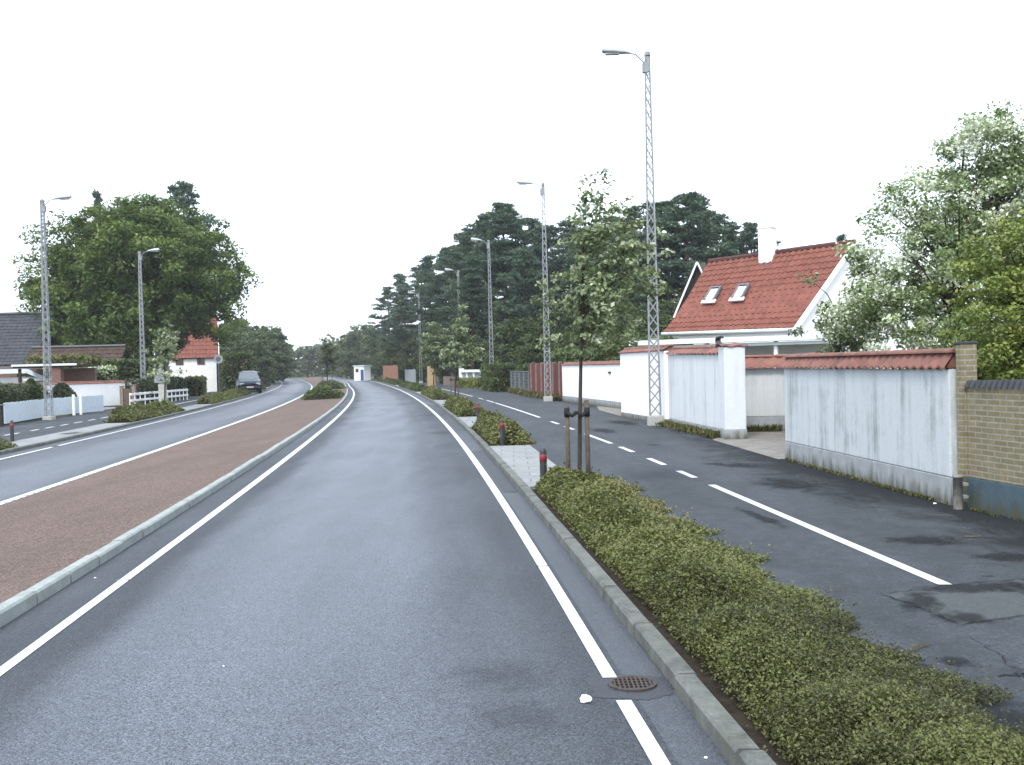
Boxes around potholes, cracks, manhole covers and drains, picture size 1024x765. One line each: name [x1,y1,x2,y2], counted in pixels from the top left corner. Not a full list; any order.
crack [970,637,1024,677]
